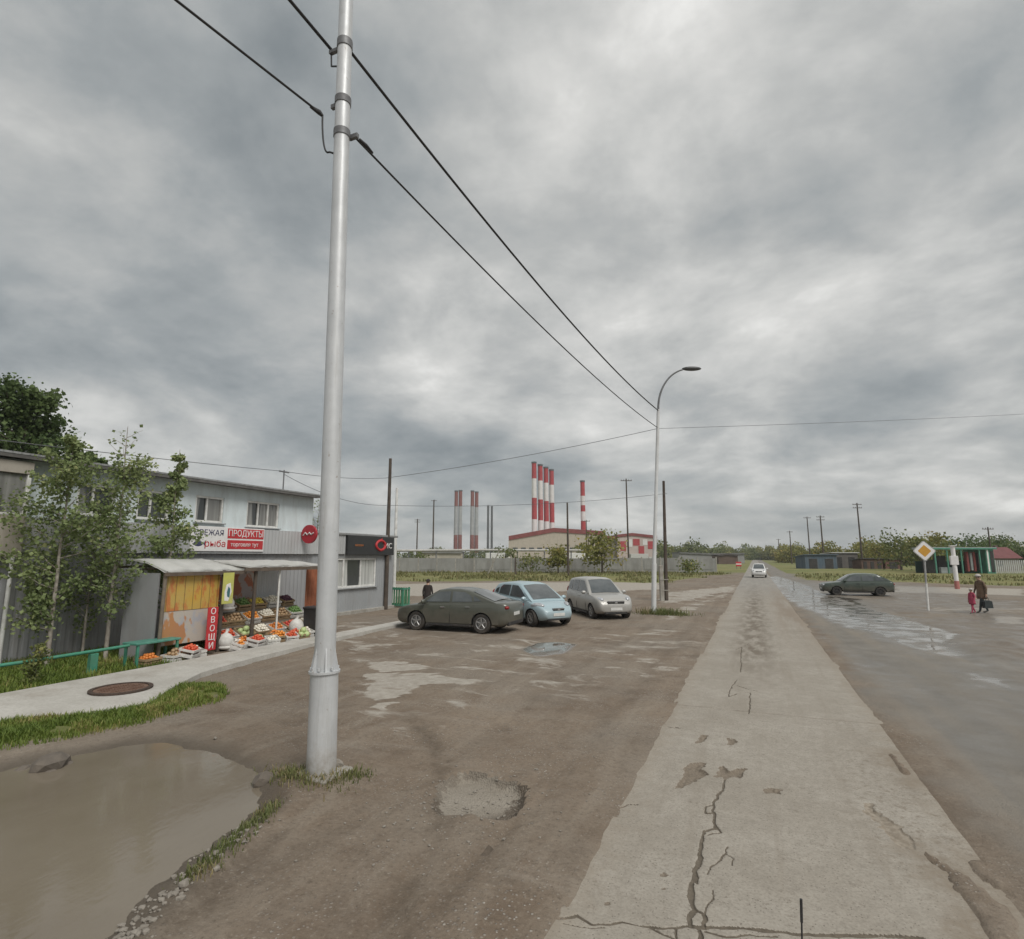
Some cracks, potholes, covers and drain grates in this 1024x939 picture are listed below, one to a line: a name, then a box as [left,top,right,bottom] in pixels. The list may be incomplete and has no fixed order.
pothole [675,762,709,789]
manhole cover [87,682,154,696]
crack [728,643,755,714]
pothole [713,766,748,780]
pothole [430,770,530,820]
crack [561,780,924,939]
